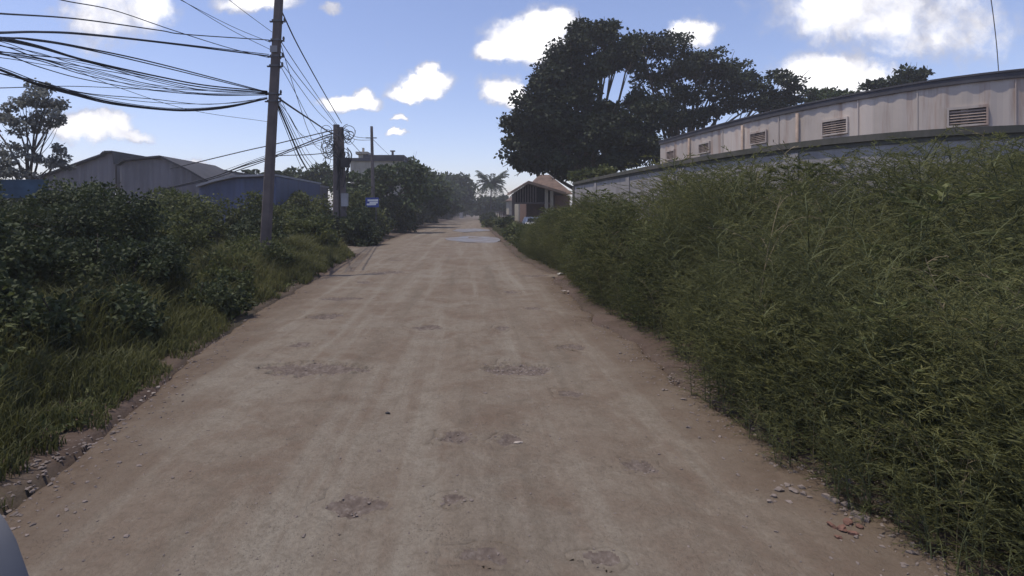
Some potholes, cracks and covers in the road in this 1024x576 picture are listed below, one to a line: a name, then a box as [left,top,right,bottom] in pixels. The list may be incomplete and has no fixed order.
pothole [431,428,478,448]
pothole [430,490,475,509]
pothole [307,485,407,525]
pothole [463,358,567,379]
pothole [565,548,630,572]
pothole [547,343,598,352]
pothole [294,312,359,321]
pothole [551,389,591,400]
pothole [399,323,454,332]
pothole [233,357,399,382]
pothole [485,431,532,451]
pothole [605,456,669,477]
